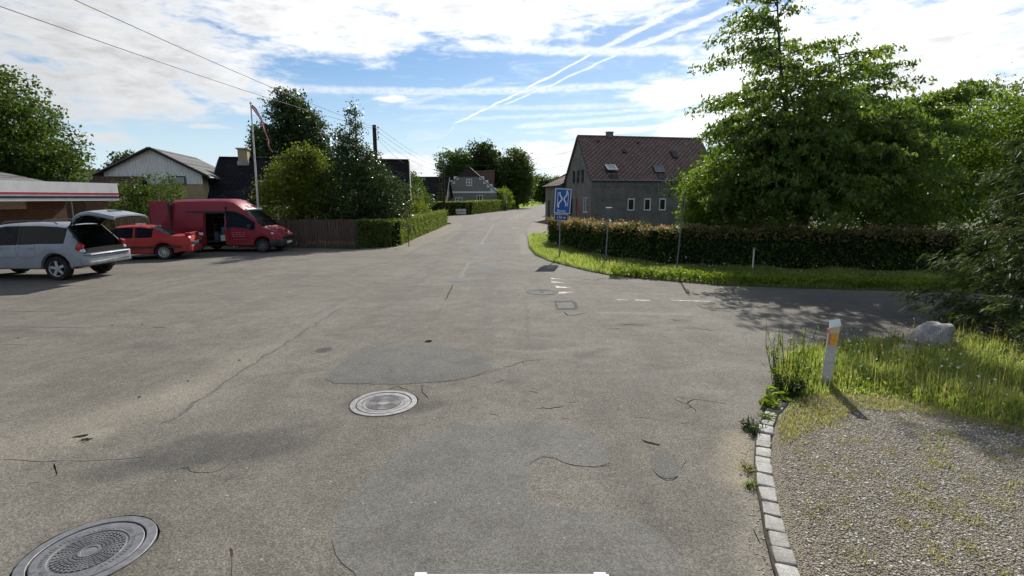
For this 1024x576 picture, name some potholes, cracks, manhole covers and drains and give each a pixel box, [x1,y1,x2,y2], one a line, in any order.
crack [4,457,138,484]
manhole cover [9,515,160,576]
manhole cover [349,390,418,417]
